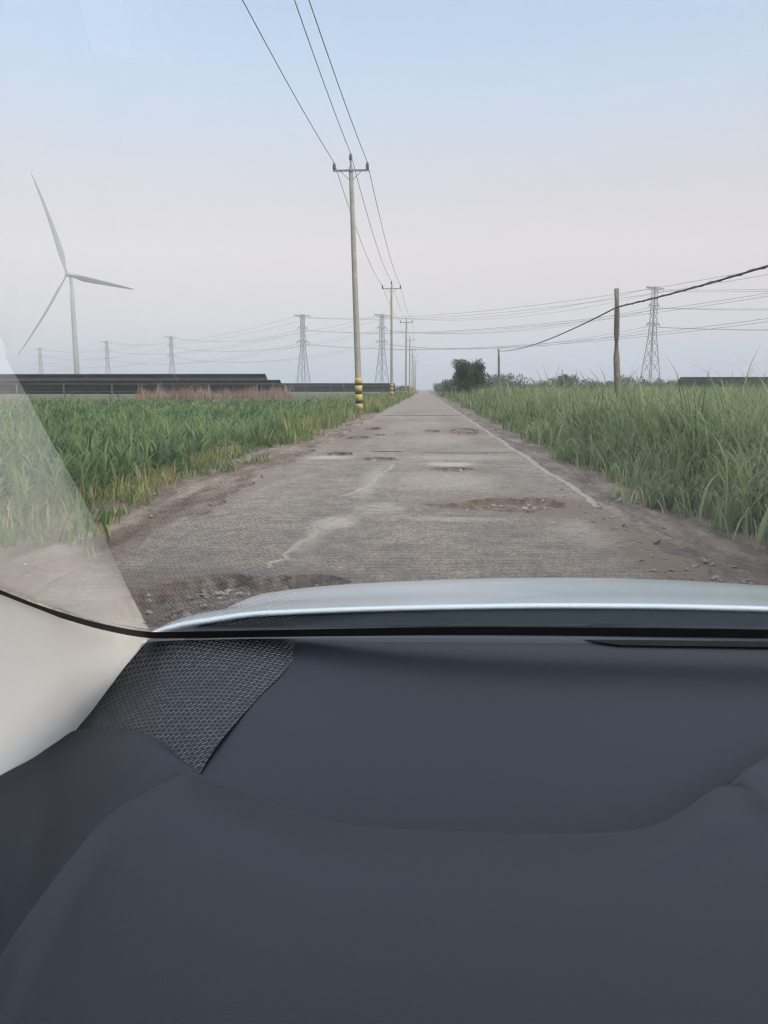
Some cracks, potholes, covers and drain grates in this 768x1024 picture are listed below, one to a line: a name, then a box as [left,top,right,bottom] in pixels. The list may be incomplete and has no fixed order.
crack [266,451,479,568]
pothole [140,573,352,601]
pothole [424,497,567,513]
